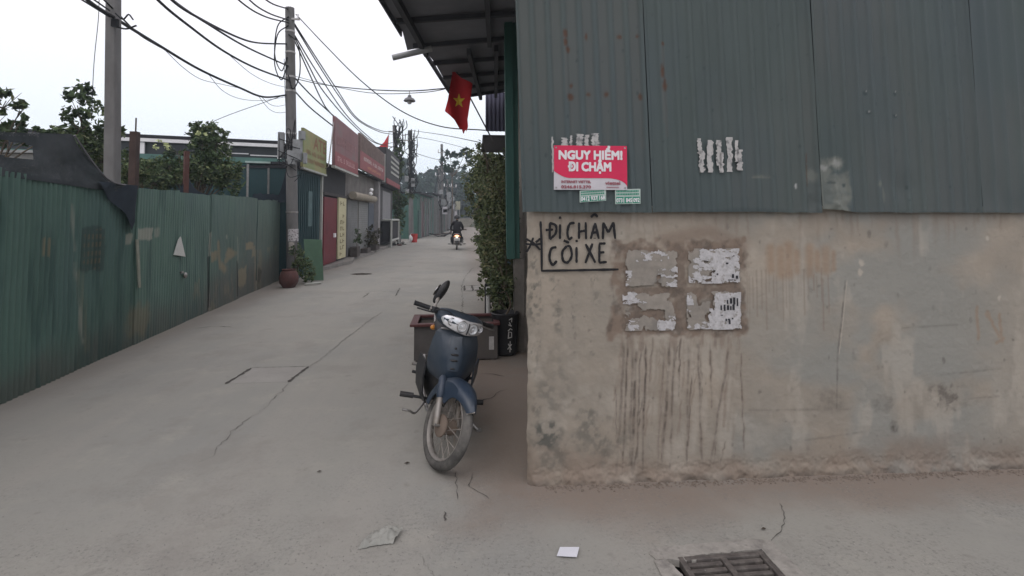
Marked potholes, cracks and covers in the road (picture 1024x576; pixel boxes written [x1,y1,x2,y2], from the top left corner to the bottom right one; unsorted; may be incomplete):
drain grate [649,538,806,576]
